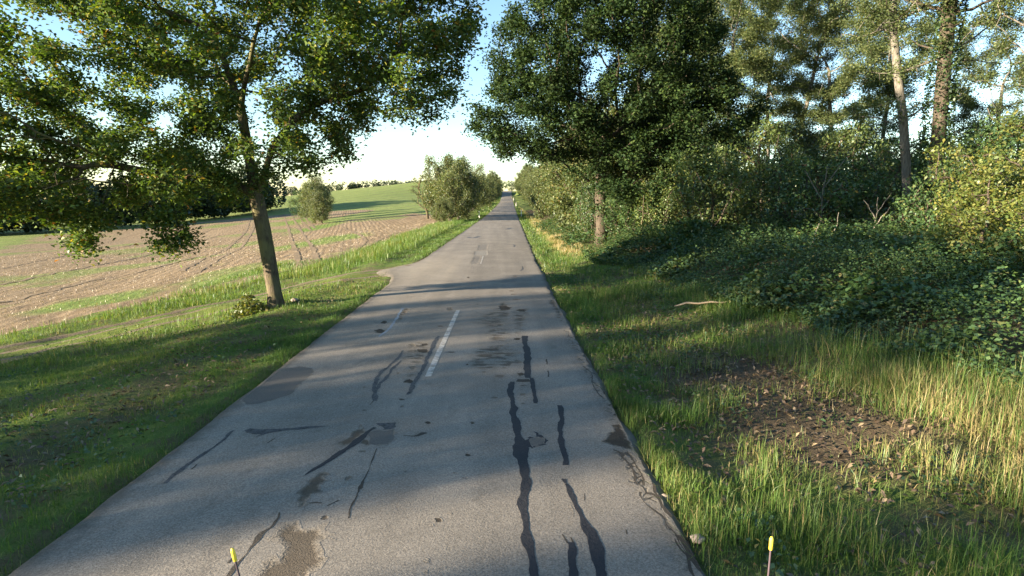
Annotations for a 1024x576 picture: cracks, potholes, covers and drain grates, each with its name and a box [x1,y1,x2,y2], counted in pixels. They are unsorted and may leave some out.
crack [610,446,703,576]
